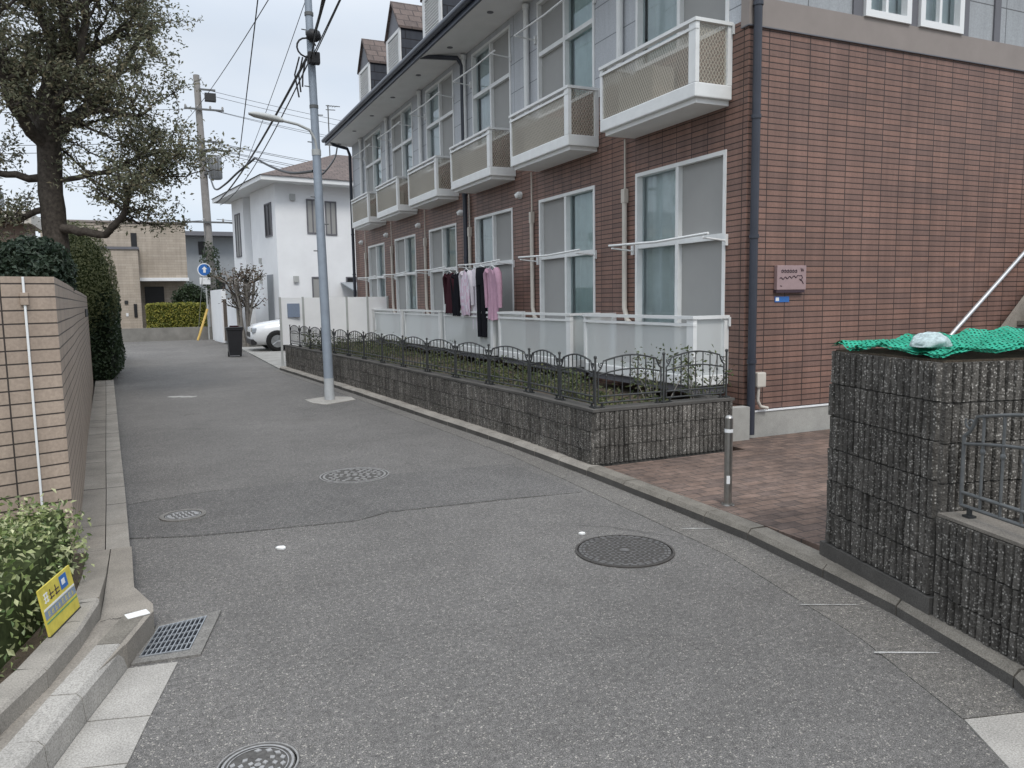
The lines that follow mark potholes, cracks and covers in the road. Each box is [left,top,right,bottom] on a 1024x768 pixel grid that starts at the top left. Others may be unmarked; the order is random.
manhole cover [159,509,207,522]
manhole cover [575,535,675,568]
manhole cover [217,742,299,768]
manhole cover [319,467,389,484]
